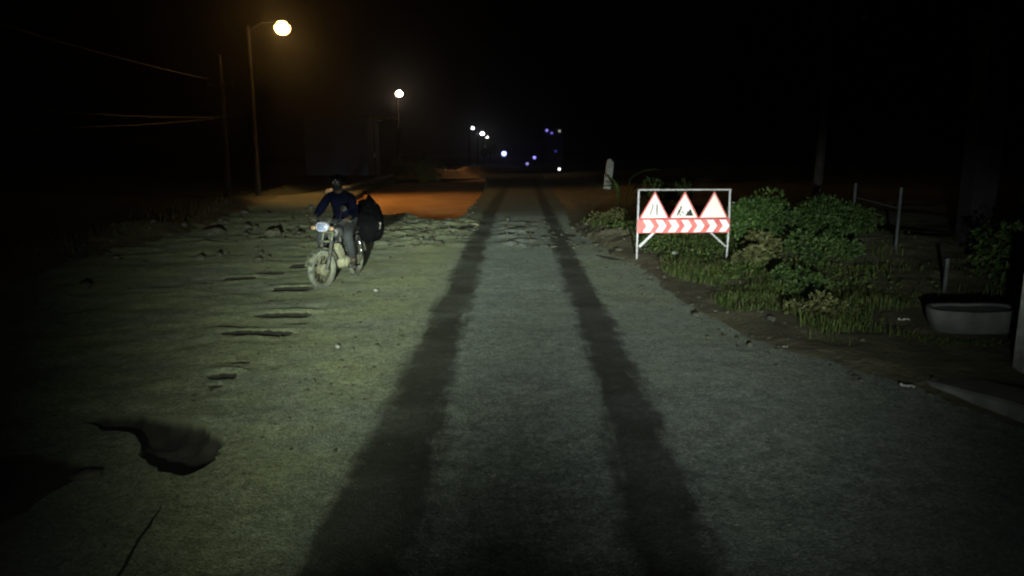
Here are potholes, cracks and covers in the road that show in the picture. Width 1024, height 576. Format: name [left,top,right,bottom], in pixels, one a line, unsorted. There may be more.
crack [116,504,162,576]
pothole [210,329,293,337]
pothole [206,370,238,380]
pothole [84,414,226,476]
